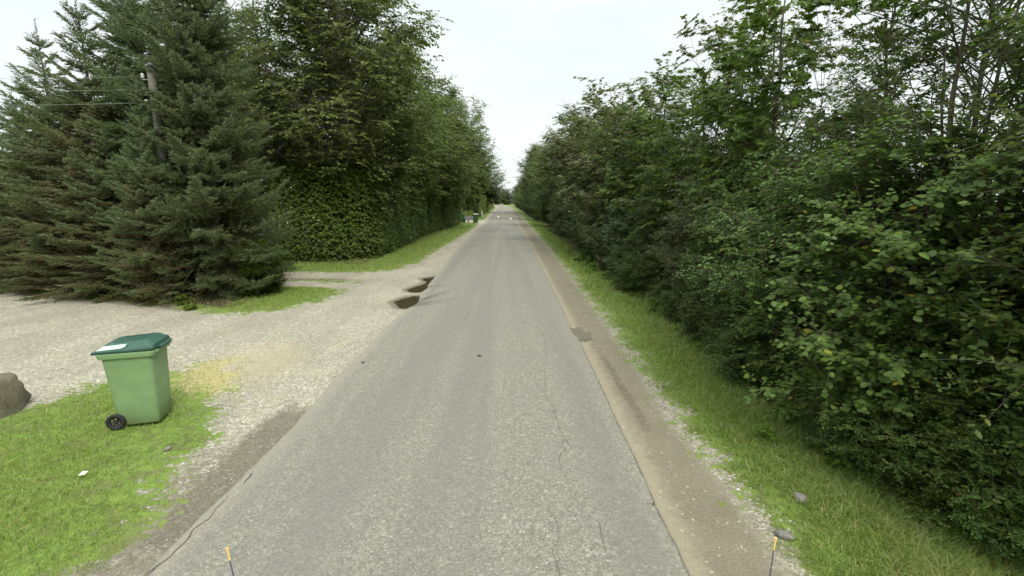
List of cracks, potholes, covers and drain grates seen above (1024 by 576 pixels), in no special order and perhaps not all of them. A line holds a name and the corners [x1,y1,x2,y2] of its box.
pothole [406,277,434,293]
pothole [394,296,420,309]
pothole [571,327,593,342]
crack [144,473,252,576]
